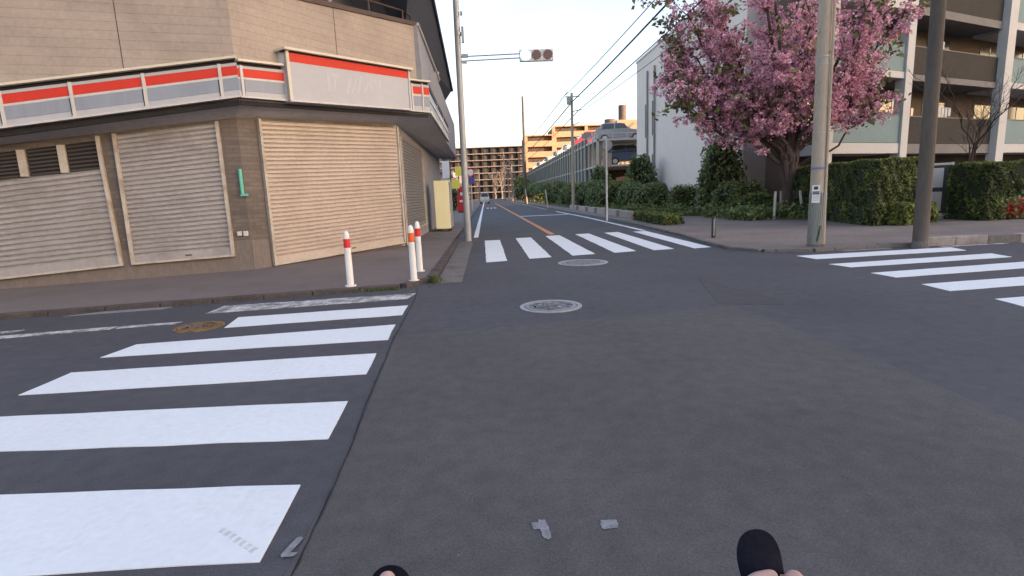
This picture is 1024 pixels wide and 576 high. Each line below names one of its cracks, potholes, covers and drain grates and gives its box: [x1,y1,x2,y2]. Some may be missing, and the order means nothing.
manhole cover [520,300,582,313]
manhole cover [172,321,225,333]
